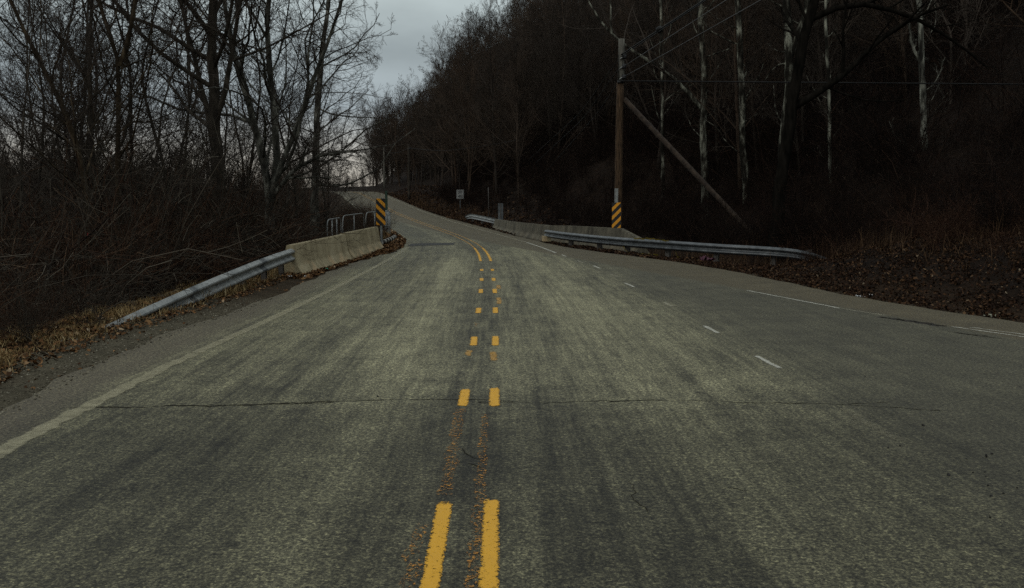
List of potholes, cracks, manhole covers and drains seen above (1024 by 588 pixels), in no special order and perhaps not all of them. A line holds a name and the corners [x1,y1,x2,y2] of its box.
crack [70,399,942,411]
